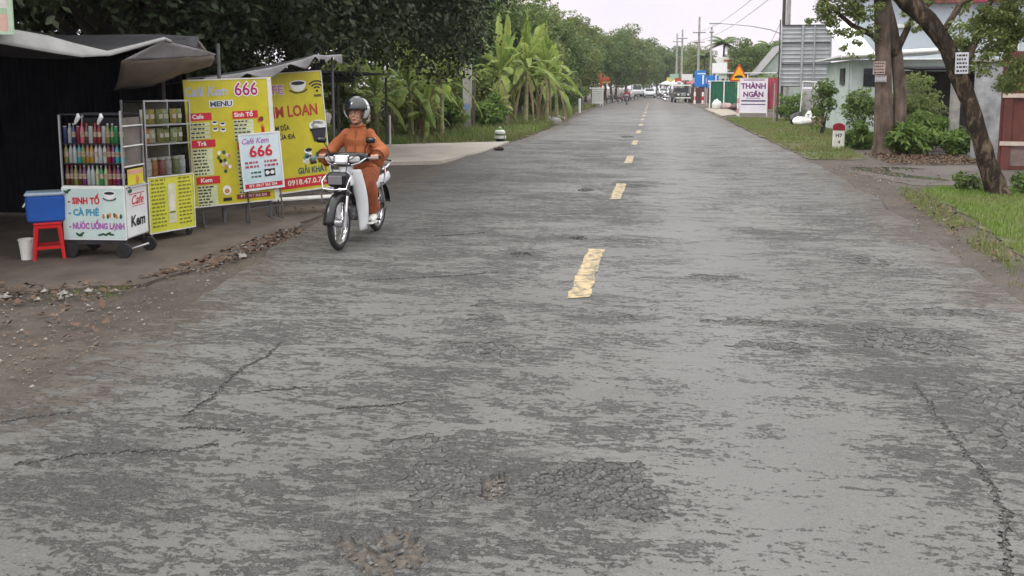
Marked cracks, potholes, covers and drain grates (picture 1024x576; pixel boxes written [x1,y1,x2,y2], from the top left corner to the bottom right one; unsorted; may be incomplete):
pothole [476,471,512,501]
crack [14,342,308,466]
crack [518,458,671,524]
pothole [331,526,434,576]
crack [381,433,484,509]
crack [1,411,73,423]
crack [336,400,430,410]
crack [908,380,1024,576]
